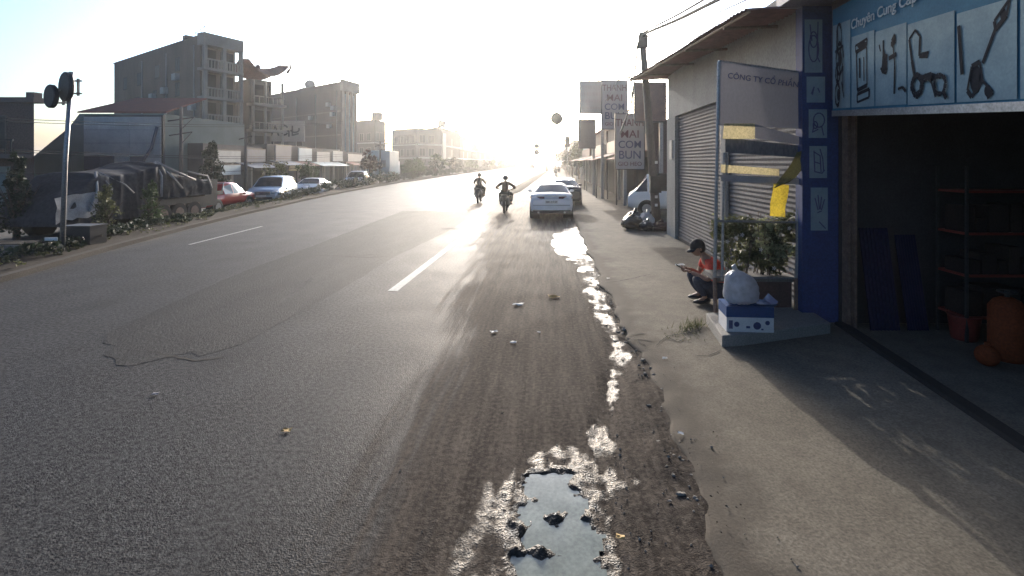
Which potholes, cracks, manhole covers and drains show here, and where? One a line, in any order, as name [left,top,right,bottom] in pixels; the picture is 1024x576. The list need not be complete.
crack [147,350,228,361]
pothole [502,463,614,576]
